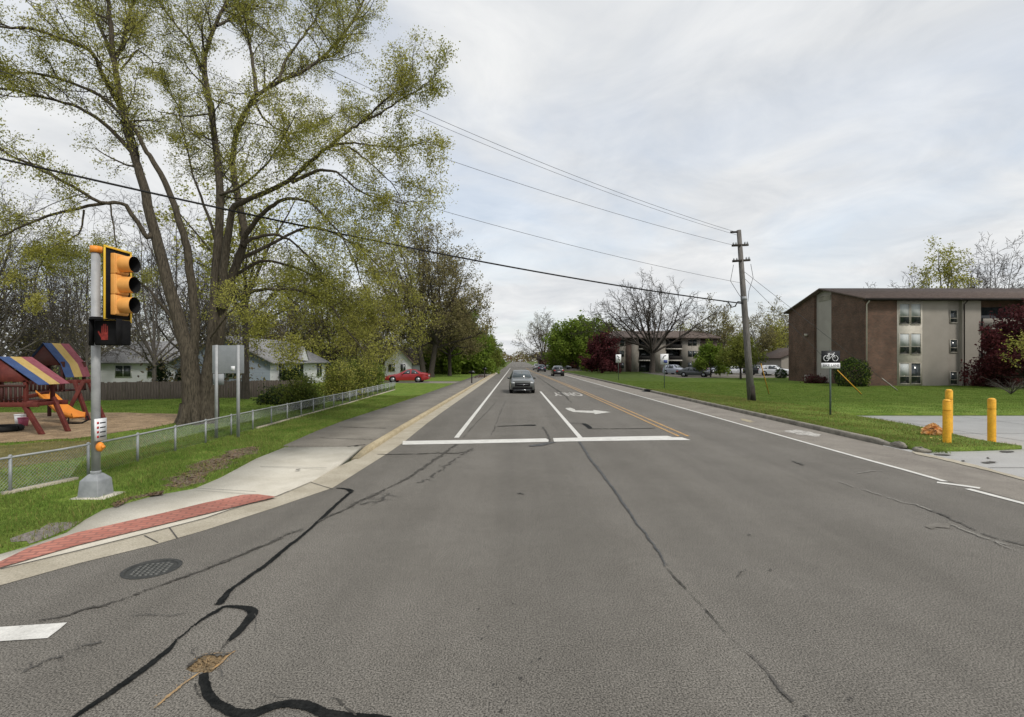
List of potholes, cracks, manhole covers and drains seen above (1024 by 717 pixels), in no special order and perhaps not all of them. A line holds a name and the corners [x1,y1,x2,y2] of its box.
manhole cover [120,558,183,579]
pothole [186,655,227,673]
crack [838,470,1024,545]
crack [14,444,473,717]
